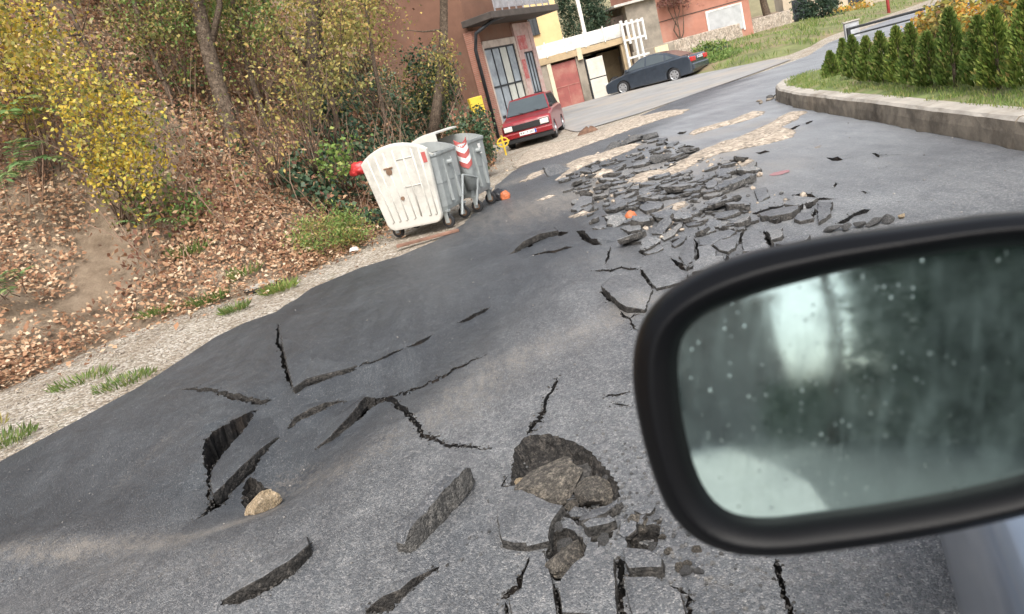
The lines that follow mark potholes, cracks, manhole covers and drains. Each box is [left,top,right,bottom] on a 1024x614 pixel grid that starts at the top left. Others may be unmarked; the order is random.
crack [182,153,887,614]
pothole [546,528,587,581]
pothole [510,433,620,526]
pothole [625,524,661,549]
